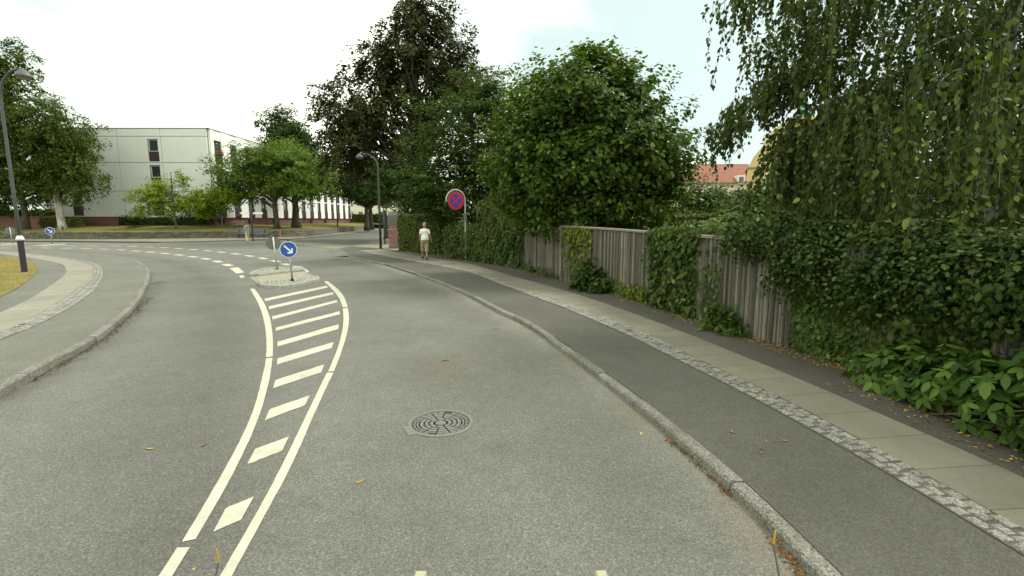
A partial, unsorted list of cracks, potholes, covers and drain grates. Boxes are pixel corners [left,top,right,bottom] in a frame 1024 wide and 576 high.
manhole cover [402,409,474,437]
